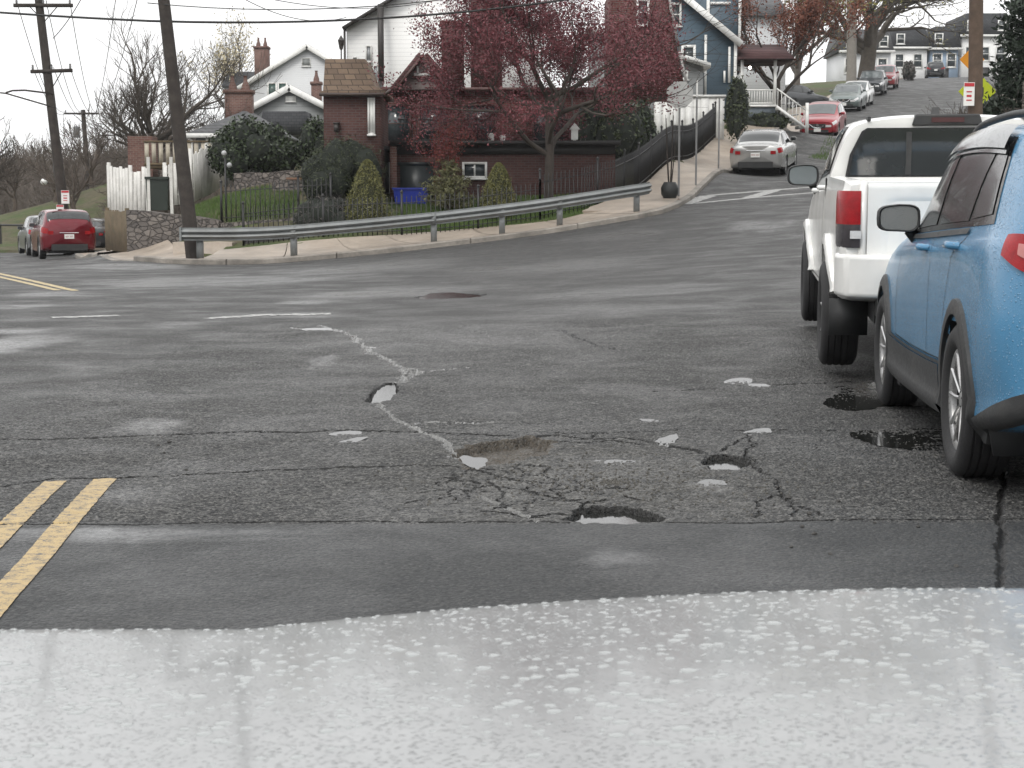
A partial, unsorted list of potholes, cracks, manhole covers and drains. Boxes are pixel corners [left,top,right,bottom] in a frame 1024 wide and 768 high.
crack [991,471,1011,588]
pothole [700,453,757,470]
crack [0,403,648,523]
pothole [364,382,400,403]
pothole [560,505,666,524]
crack [291,325,470,384]
pothole [452,435,558,470]
crack [535,429,858,518]
